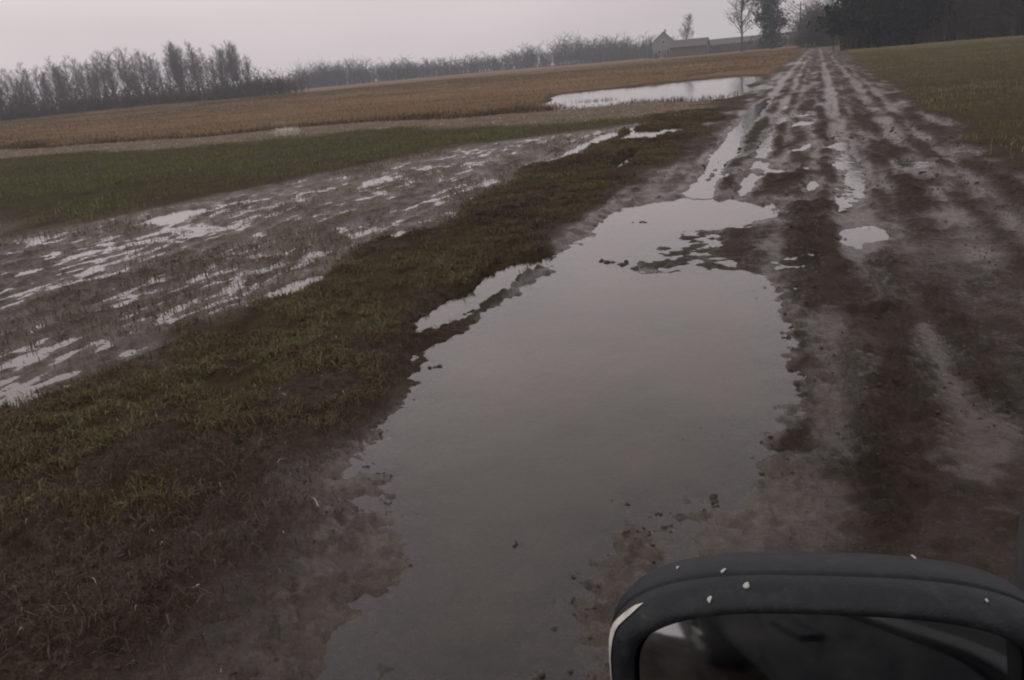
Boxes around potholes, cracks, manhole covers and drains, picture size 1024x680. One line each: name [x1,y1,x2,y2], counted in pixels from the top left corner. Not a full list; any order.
pothole [832,221,905,250]
pothole [173,191,868,680]
pothole [795,173,827,192]
